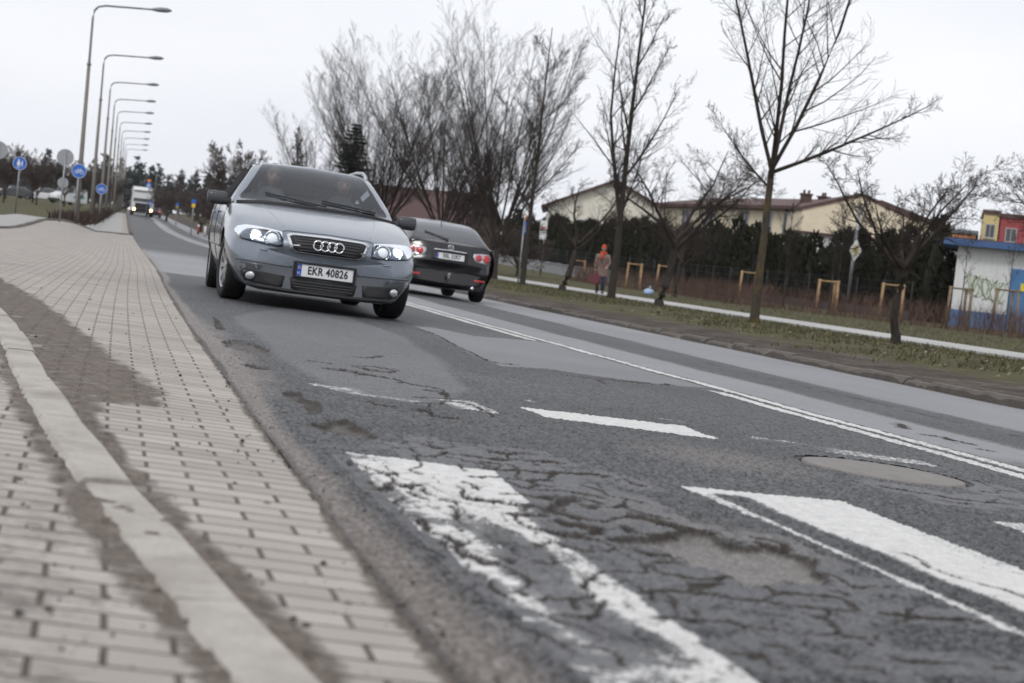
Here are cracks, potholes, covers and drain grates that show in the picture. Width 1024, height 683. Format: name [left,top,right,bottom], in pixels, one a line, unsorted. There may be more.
pothole [221,339,270,355]
pothole [683,581,726,594]
crack [307,355,495,420]
pothole [604,528,834,587]
pothole [282,390,325,416]
manhole cover [792,455,975,488]
crack [340,438,1024,676]
pothole [309,418,381,440]
